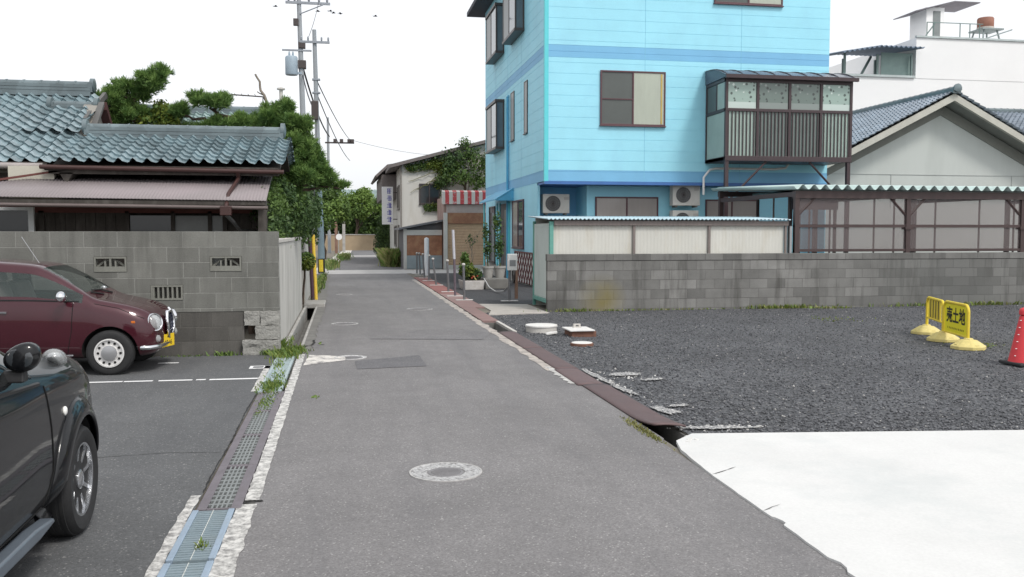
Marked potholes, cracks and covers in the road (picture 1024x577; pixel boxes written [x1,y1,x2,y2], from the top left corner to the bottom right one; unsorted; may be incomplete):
drain grate [220,434,269,466]
drain grate [237,410,278,435]
manhole cover [409,462,482,482]
drain grate [197,464,257,511]
drain grate [249,391,285,411]
